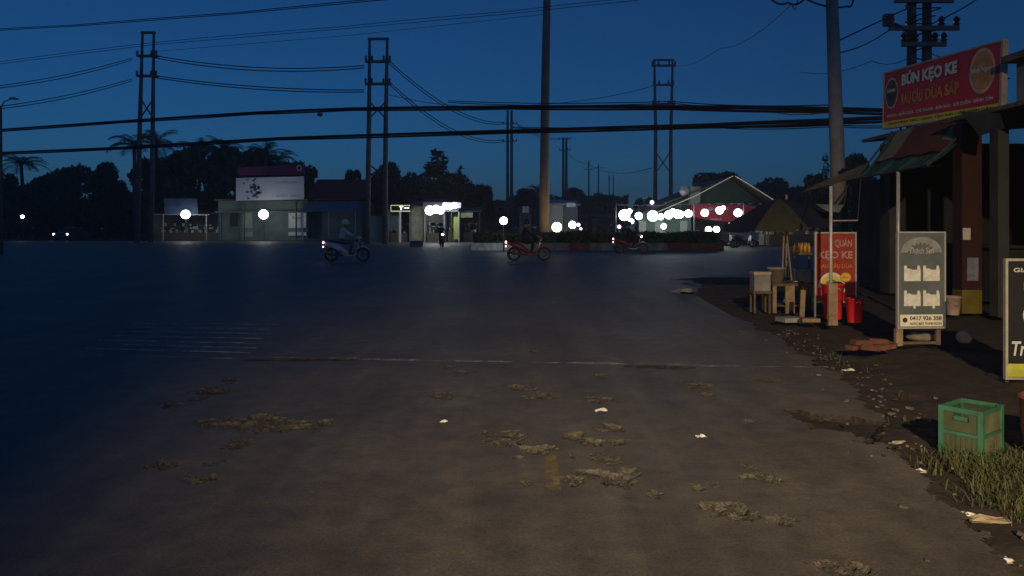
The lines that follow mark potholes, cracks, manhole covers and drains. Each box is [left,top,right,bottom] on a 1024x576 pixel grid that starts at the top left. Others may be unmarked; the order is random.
pothole [519,393,560,401]
pothole [505,384,538,392]
pothole [735,463,791,487]
pothole [215,437,256,451]
pothole [609,438,632,446]
pothole [783,409,898,449]
pothole [559,430,607,447]
pothole [185,387,244,396]
pothole [426,391,457,400]
pothole [191,412,335,434]
pothole [694,500,802,529]
pothole [802,559,878,576]
